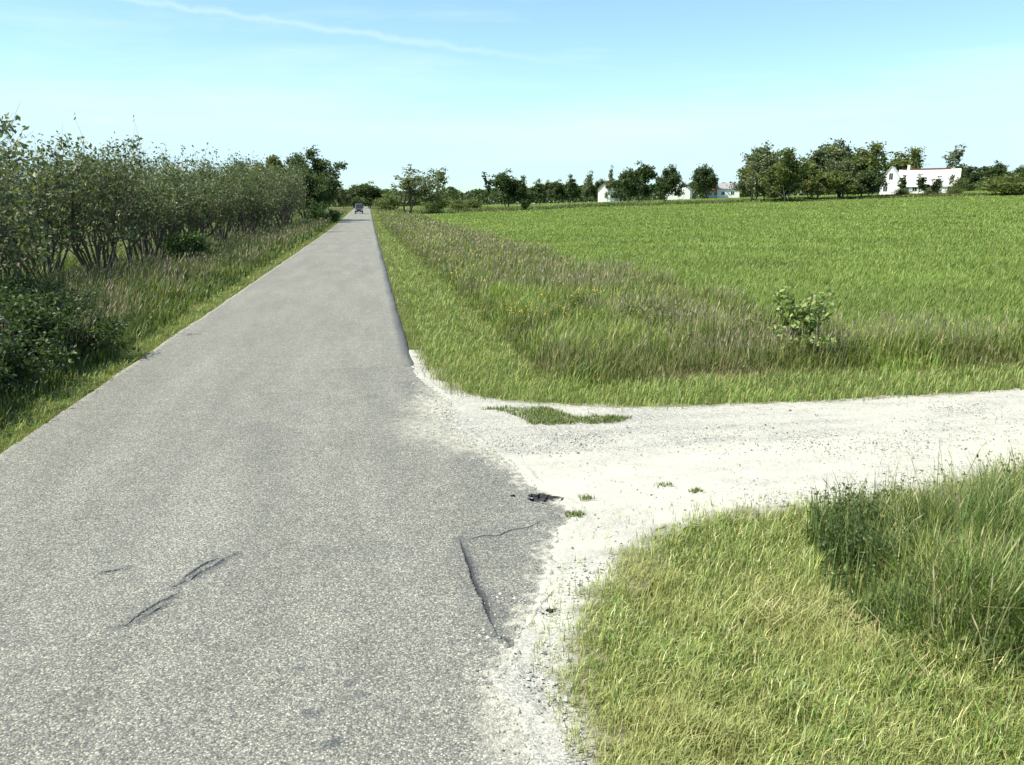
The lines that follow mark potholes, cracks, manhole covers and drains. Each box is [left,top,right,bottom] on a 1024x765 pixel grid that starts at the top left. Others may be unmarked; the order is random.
pothole [525,493,564,504]
crack [453,519,546,648]
crack [103,552,241,626]
